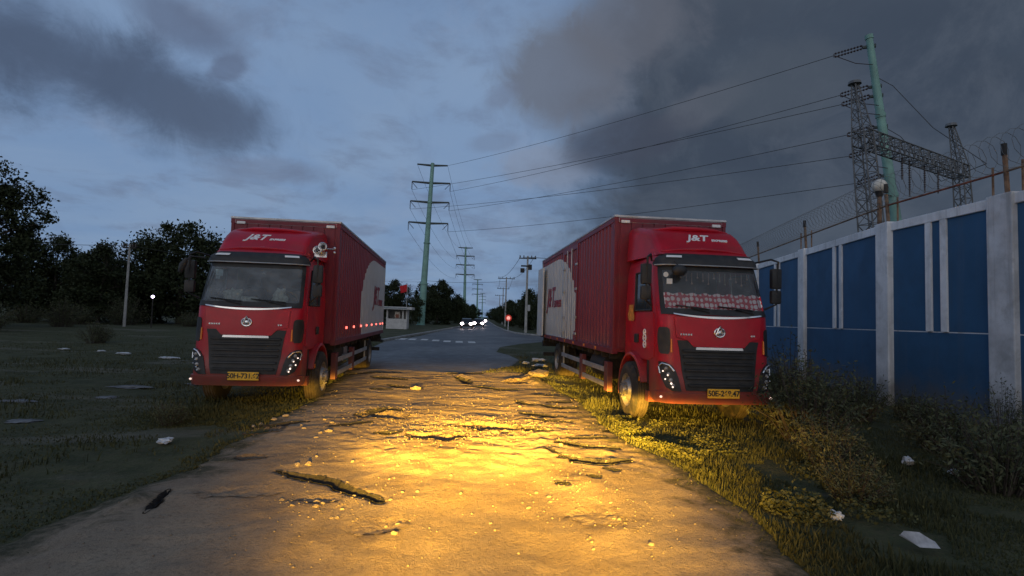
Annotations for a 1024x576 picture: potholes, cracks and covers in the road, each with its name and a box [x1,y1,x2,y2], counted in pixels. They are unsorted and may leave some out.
crack [327,407,403,435]
crack [276,470,385,504]
crack [445,372,633,485]
